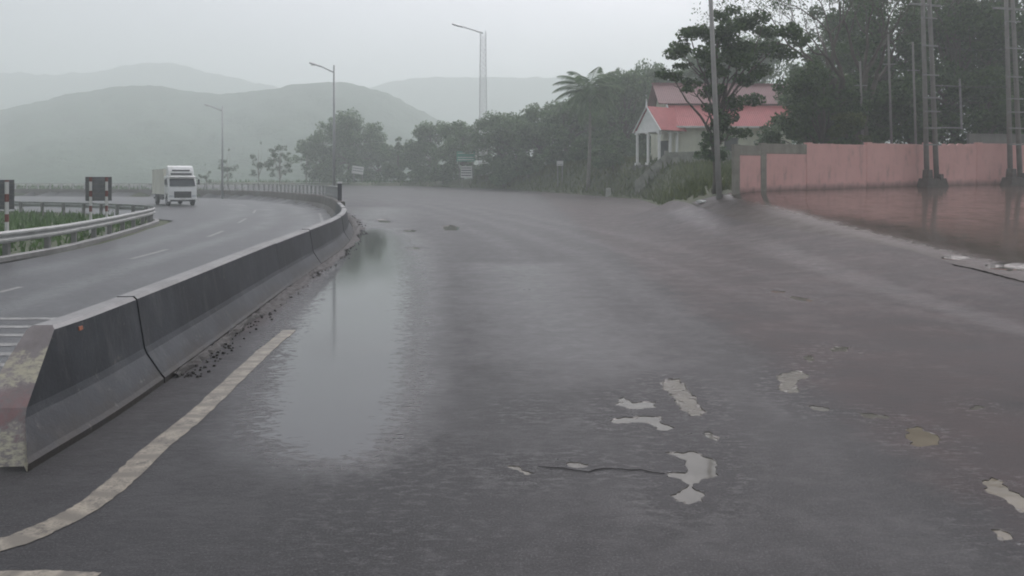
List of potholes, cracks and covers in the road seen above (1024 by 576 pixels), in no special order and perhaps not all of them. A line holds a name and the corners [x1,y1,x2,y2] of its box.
pothole [982,477,1024,513]
pothole [660,378,707,416]
pothole [616,396,657,409]
pothole [610,416,675,431]
pothole [776,370,810,393]
pothole [990,529,1013,543]
crack [538,466,664,474]
pothole [664,451,718,504]
